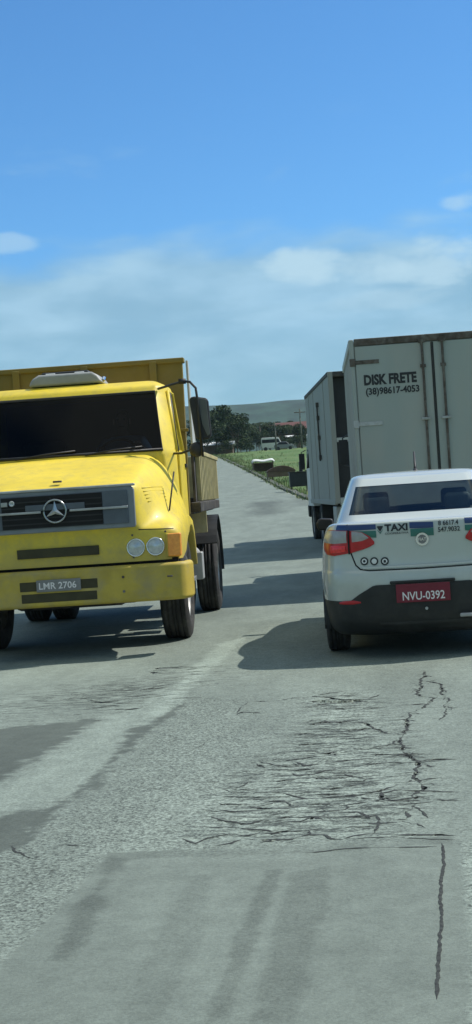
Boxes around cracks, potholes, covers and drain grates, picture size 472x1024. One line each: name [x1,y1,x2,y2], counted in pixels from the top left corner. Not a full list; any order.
crack [184,672,458,999]
